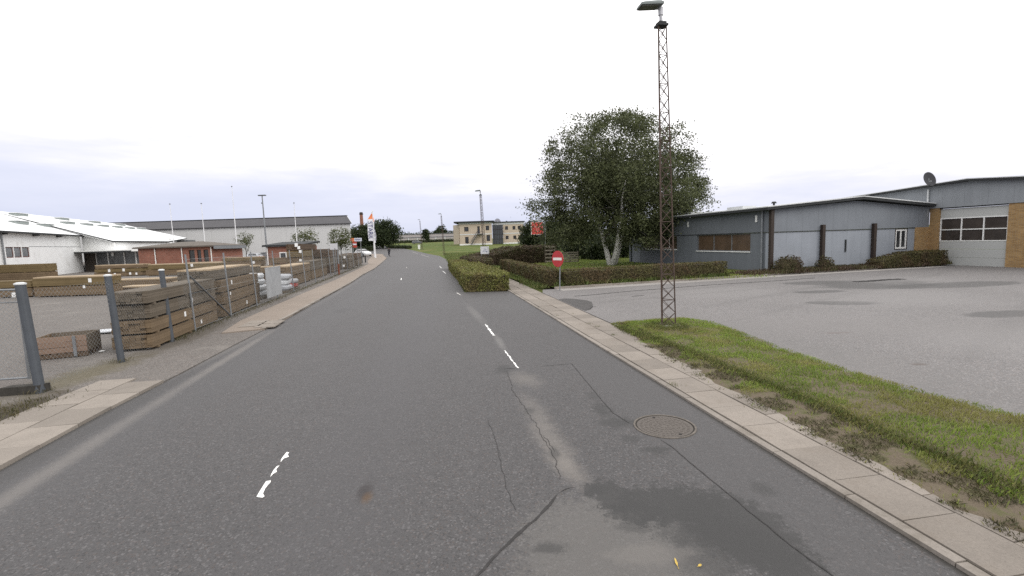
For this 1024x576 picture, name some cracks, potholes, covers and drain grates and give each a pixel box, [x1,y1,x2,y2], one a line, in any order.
crack [509,377,561,480]
manhole cover [633,414,697,439]
